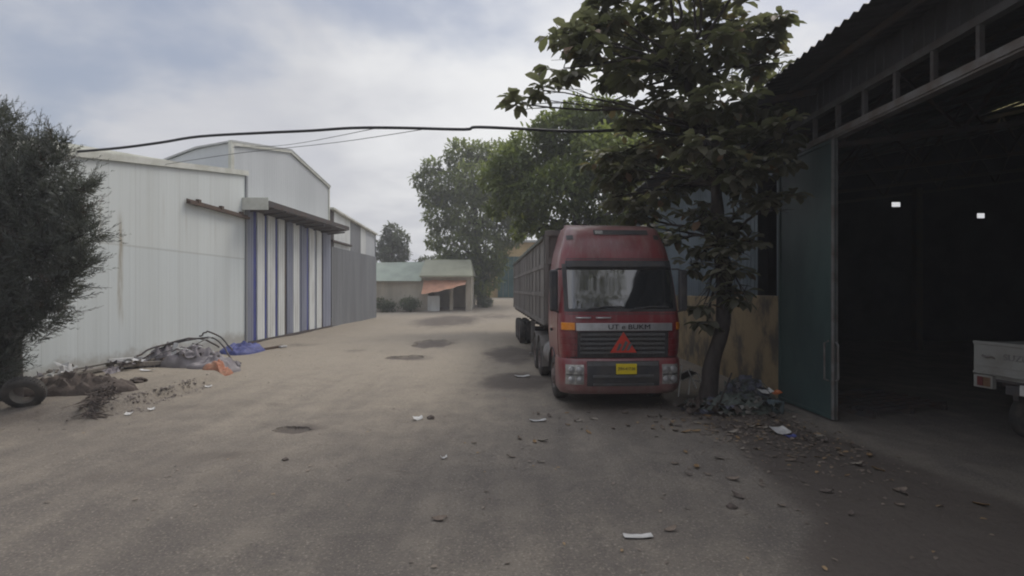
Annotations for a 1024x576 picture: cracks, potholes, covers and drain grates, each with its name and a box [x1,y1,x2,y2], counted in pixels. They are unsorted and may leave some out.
pothole [272,426,312,434]
